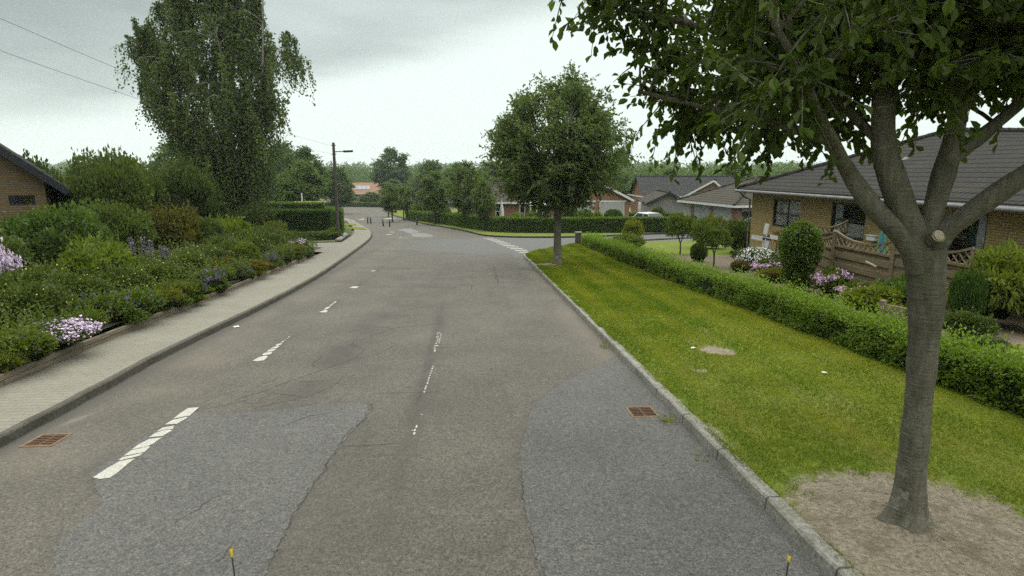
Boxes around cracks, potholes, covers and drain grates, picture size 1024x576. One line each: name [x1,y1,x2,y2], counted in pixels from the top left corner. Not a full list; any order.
crack [202,324,432,425]
drain grate [19,433,73,448]
drain grate [625,406,660,418]
